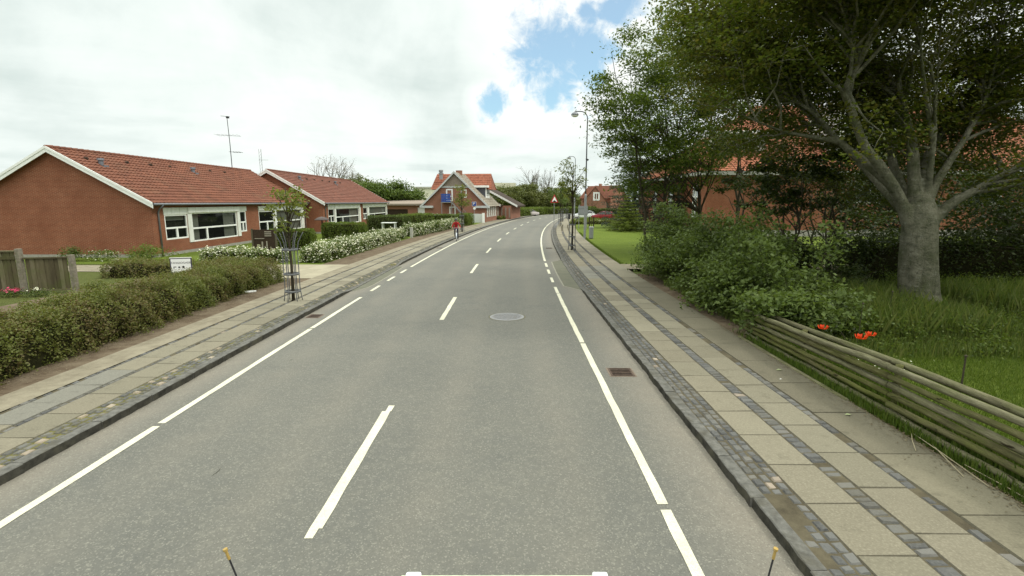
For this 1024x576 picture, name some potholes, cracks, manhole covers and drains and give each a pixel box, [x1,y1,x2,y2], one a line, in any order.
drain grate [606,368,637,377]
manhole cover [489,313,525,321]
